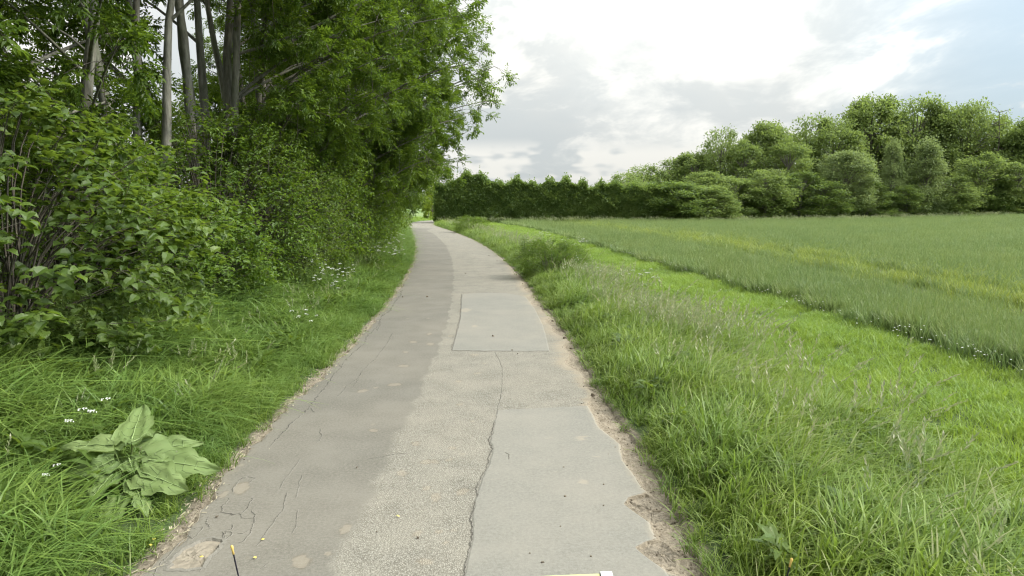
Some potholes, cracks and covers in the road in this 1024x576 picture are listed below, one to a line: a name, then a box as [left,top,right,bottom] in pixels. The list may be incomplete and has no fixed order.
crack [495,353,503,415]
crack [153,287,403,575]
